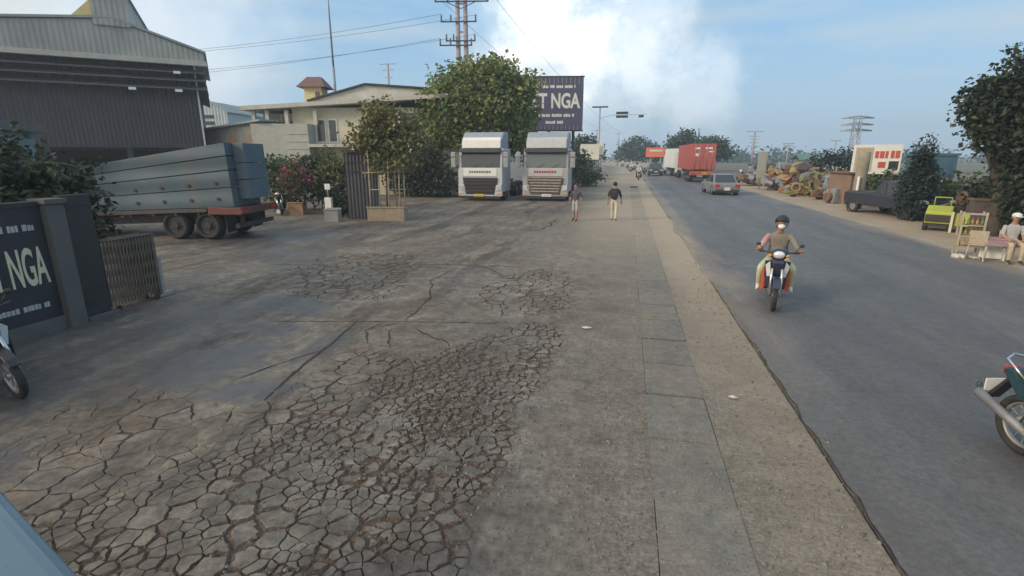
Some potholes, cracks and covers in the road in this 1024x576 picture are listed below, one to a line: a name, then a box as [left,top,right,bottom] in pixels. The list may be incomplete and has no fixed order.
crack [3,252,578,576]
